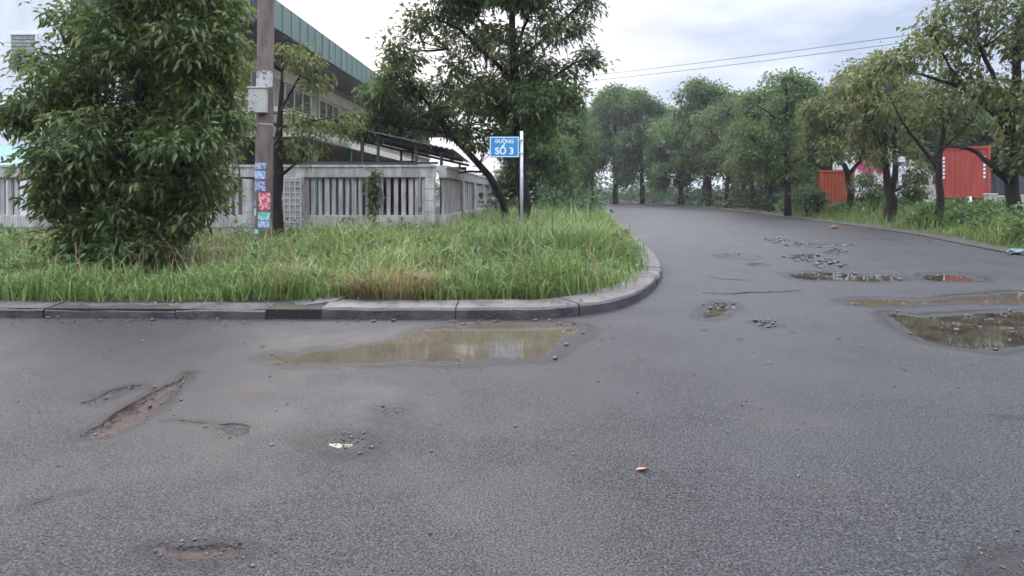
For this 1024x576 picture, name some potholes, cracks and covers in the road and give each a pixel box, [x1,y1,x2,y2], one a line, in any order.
pothole [262,319,589,366]
pothole [919,272,989,282]
pothole [786,270,906,282]
pothole [879,309,1024,353]
pothole [146,530,278,560]
pothole [750,319,788,328]
crack [707,277,802,295]
pothole [839,290,1024,307]
pothole [782,253,853,269]
pothole [79,372,196,438]
pothole [212,423,268,440]
pothole [698,301,736,320]
